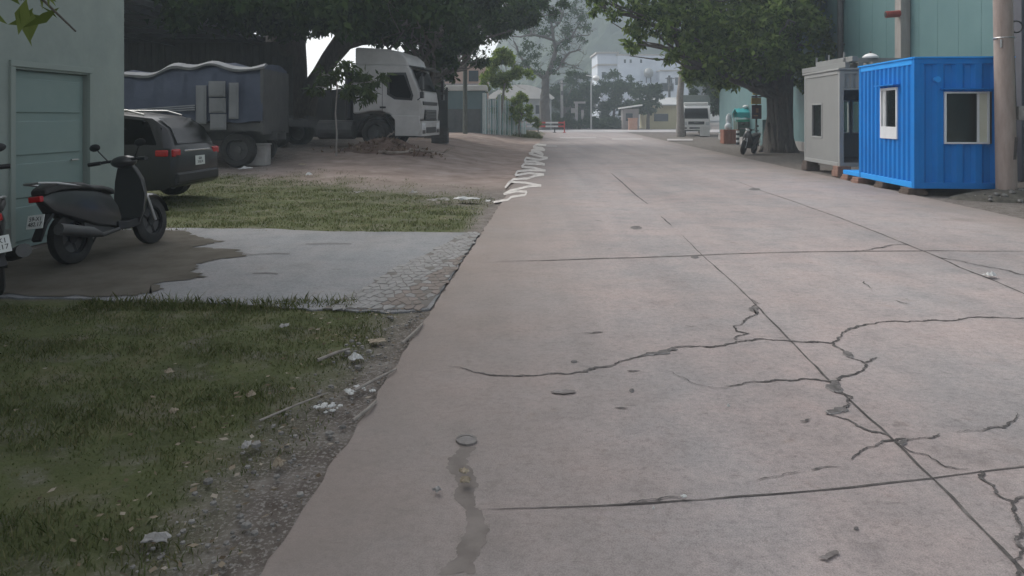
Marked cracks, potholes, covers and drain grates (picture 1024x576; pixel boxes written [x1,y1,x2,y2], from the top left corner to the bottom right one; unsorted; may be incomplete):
crack [450,299,1024,575]
manhole cover [456,434,477,446]
